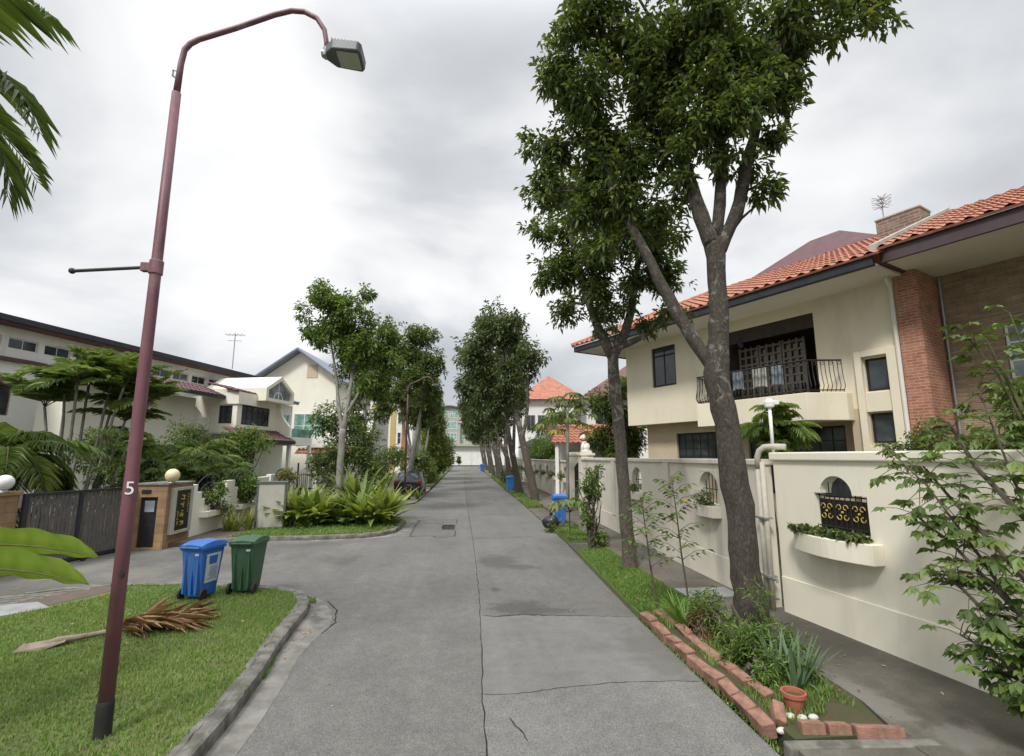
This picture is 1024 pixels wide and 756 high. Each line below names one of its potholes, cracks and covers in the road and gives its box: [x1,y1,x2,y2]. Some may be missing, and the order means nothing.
crack [410,478,699,756]
crack [322,601,338,634]
